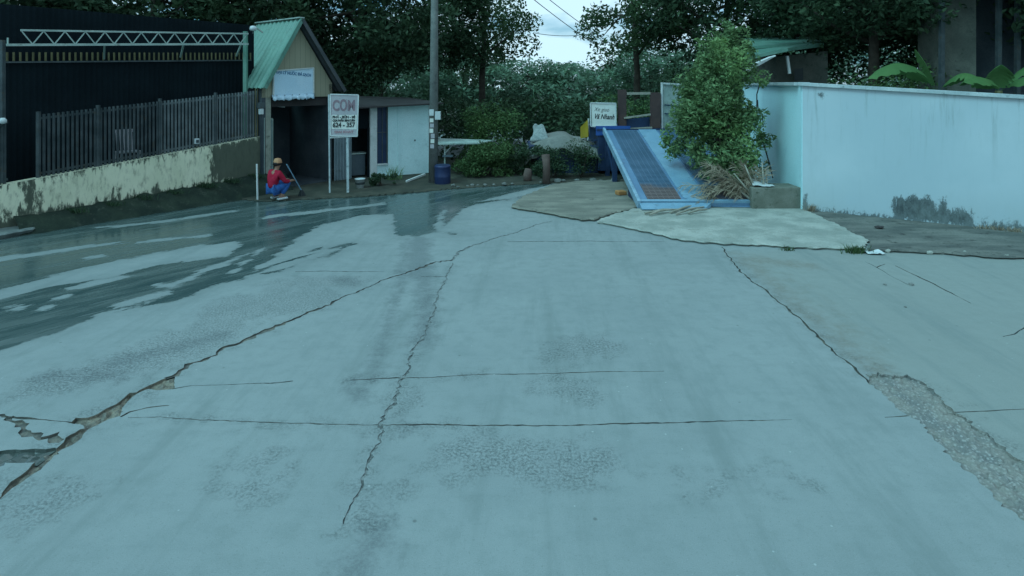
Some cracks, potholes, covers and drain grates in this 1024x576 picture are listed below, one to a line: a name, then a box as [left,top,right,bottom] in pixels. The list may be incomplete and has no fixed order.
crack [0,222,767,524]
pothole [866,372,1024,521]
crack [869,263,970,303]
